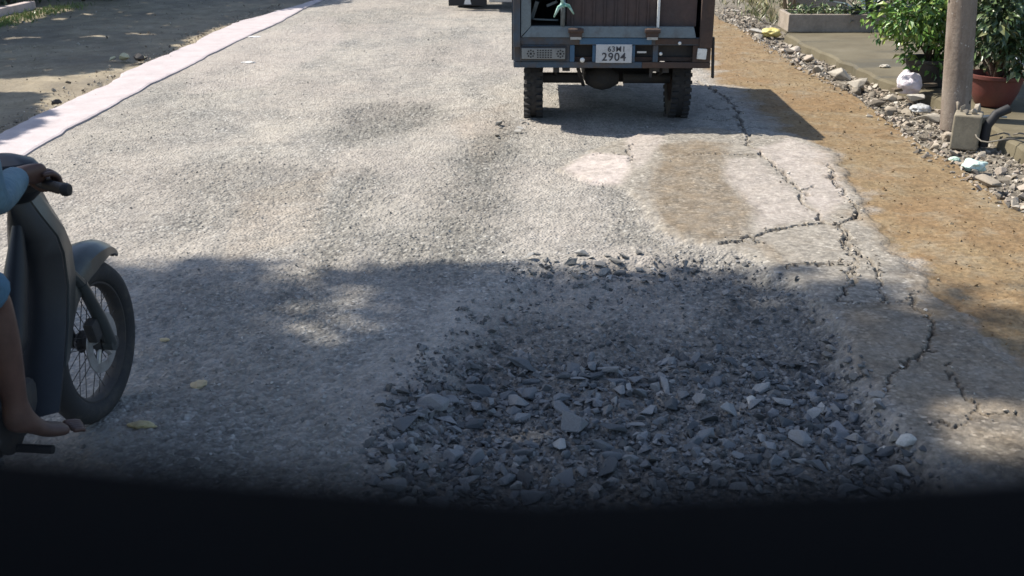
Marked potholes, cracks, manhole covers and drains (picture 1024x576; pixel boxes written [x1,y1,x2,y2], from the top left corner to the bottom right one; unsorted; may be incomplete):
crack [687,80,1021,429]
pothole [358,252,935,484]
